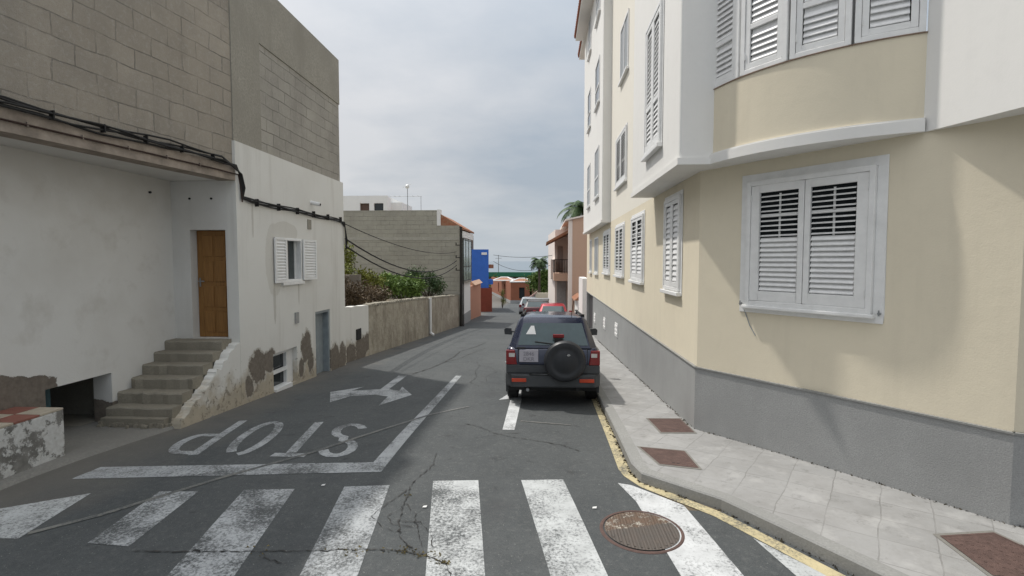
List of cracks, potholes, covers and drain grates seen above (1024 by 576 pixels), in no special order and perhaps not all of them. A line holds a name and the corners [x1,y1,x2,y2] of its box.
utility cover [646,418,696,433]
crack [130,455,452,576]
utility cover [637,446,702,470]
manhole cover [599,510,685,554]
